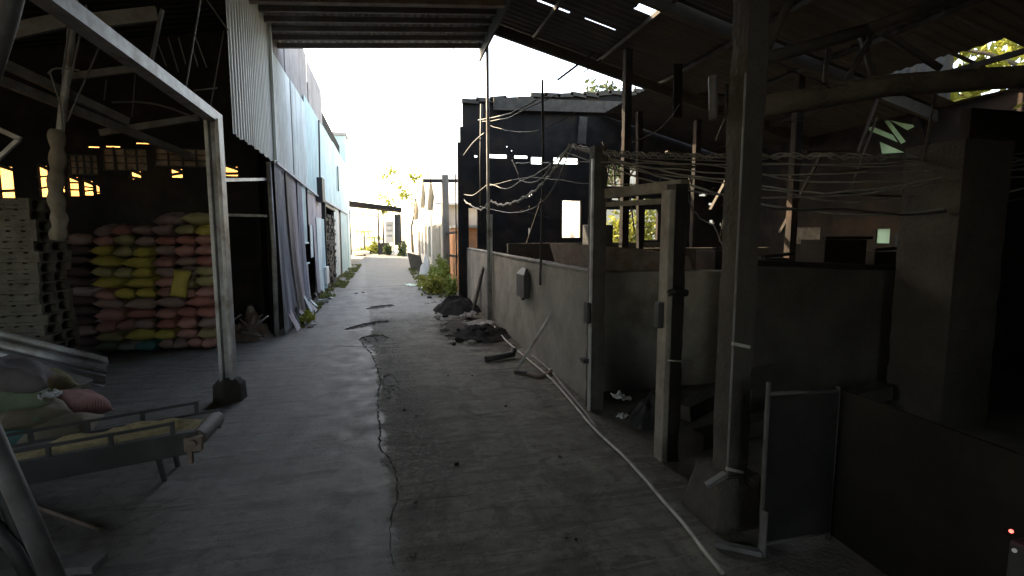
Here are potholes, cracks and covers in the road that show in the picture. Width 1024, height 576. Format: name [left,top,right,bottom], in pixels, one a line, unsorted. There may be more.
crack [348,330,482,565]
pothole [345,320,389,330]
pothole [359,334,389,345]
